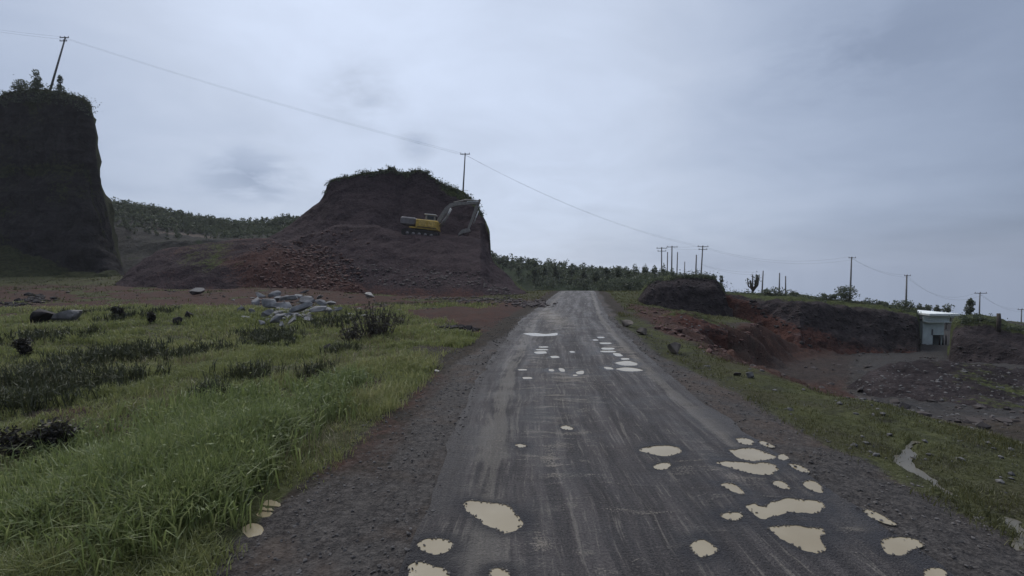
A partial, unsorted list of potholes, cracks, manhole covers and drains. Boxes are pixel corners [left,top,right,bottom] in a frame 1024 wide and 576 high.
pothole [639,445,682,456]
pothole [728,447,776,461]
pothole [746,497,825,519]
pothole [463,499,524,533]
pothole [716,461,779,475]
pothole [721,482,744,494]
pothole [862,508,897,527]
pothole [416,537,454,555]
pothole [802,479,824,493]
pothole [653,462,671,470]
pothole [689,539,719,557]
pothole [880,536,926,555]
